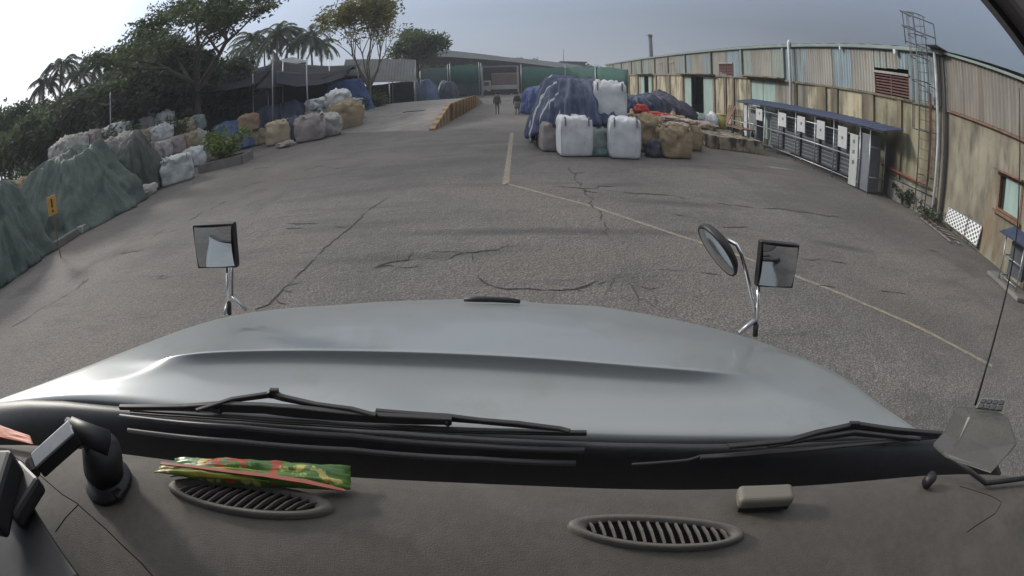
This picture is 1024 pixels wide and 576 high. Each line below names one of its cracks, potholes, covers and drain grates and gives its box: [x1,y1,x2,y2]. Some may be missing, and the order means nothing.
crack [552,167,838,240]
crack [254,200,384,310]
crack [353,245,660,310]
